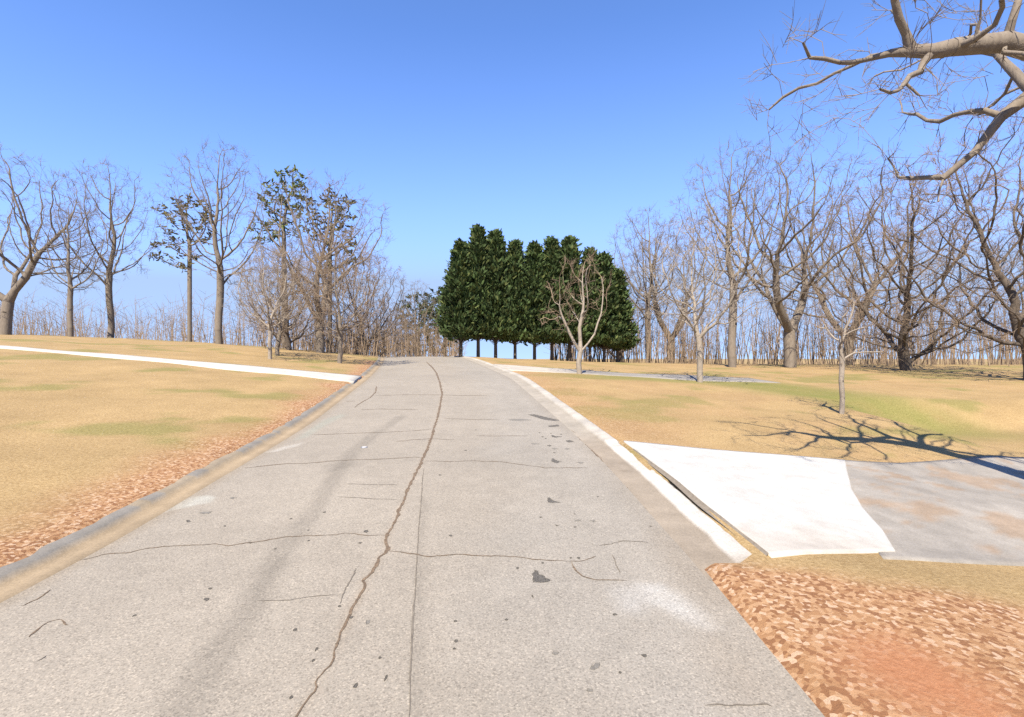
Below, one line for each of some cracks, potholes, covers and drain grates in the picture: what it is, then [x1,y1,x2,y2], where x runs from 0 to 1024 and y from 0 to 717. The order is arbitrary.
crack [82,363,769,717]
